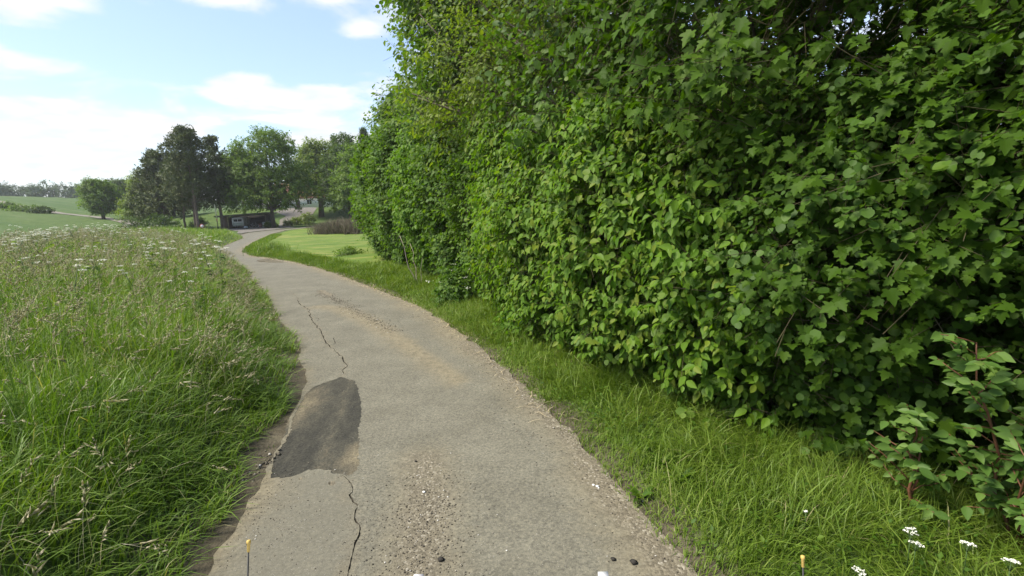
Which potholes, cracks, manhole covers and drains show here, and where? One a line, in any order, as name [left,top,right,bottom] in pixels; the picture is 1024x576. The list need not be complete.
crack [297,298,348,374]
crack [342,475,361,575]
